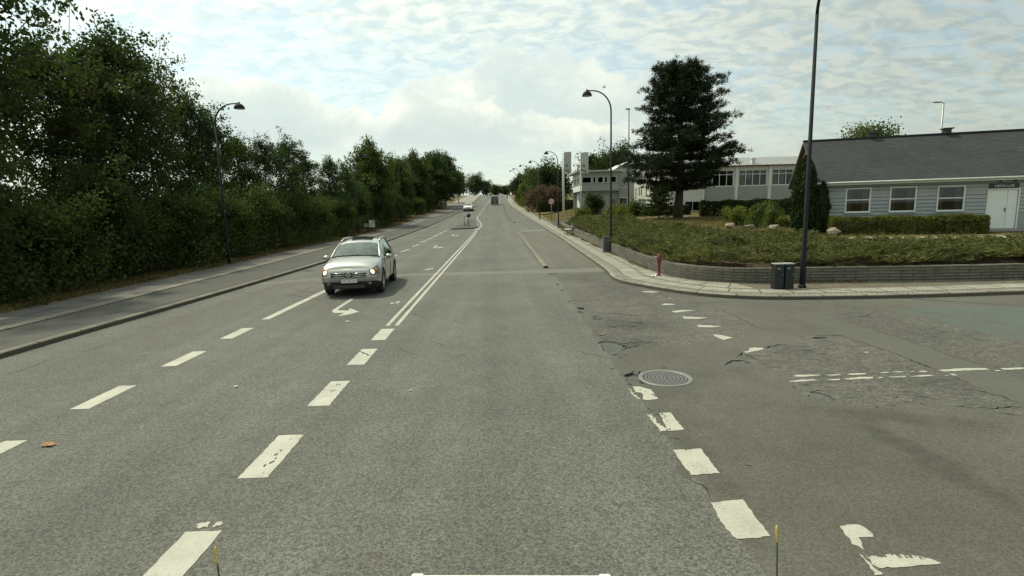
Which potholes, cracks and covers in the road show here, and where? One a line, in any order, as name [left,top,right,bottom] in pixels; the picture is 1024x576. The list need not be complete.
crack [658,293,1024,416]
pothole [624,373,644,385]
manhole cover [638,370,694,387]
crack [566,300,665,385]
pothole [599,341,627,355]
